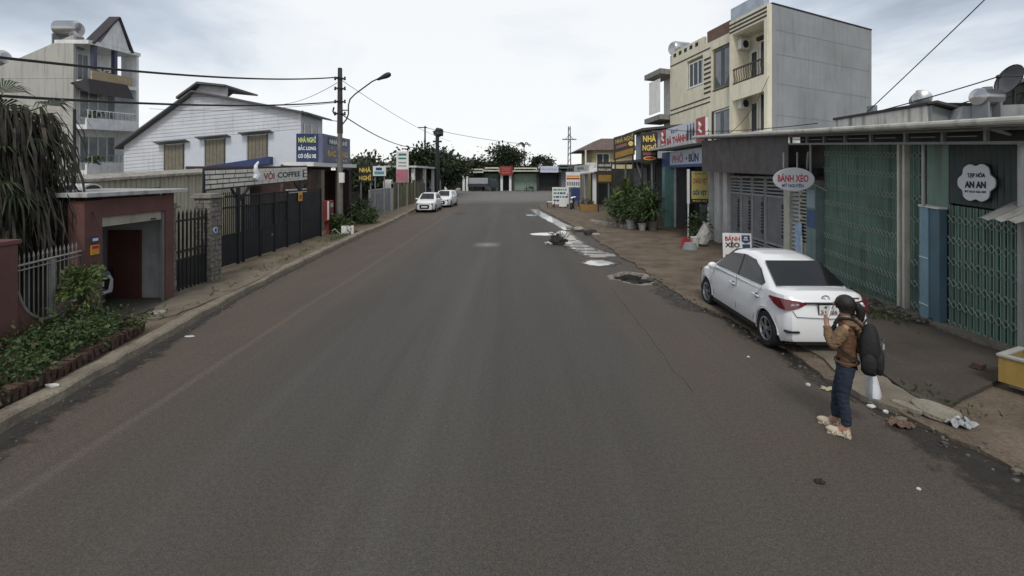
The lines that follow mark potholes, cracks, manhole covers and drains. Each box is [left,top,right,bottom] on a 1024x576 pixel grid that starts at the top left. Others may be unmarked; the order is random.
pothole [607,272,656,285]
